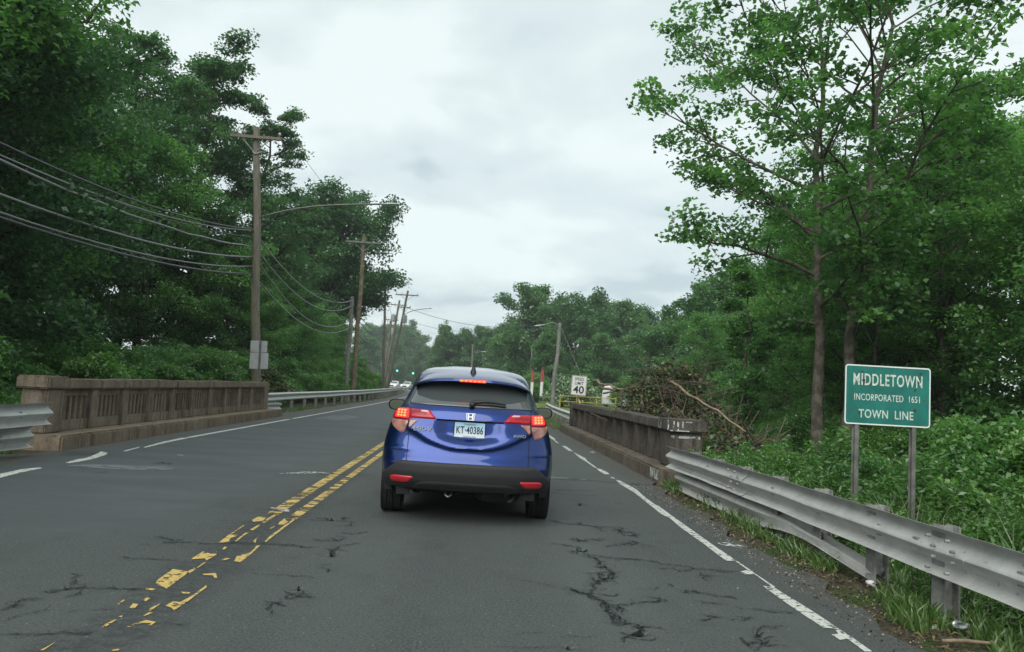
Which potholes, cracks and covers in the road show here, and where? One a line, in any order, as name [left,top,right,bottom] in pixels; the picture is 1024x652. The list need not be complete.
crack [0,573,153,636]
crack [500,520,792,650]
crack [123,511,367,615]
